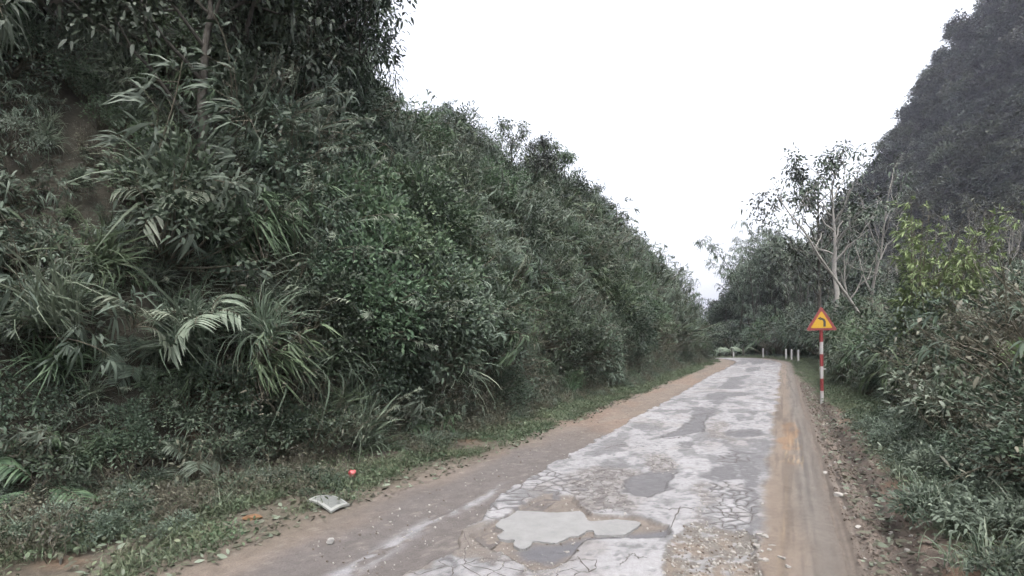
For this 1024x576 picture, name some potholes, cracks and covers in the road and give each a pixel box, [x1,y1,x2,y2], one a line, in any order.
pothole [470,494,674,571]
crack [659,482,757,529]
crack [555,557,597,576]
crack [488,466,634,519]
